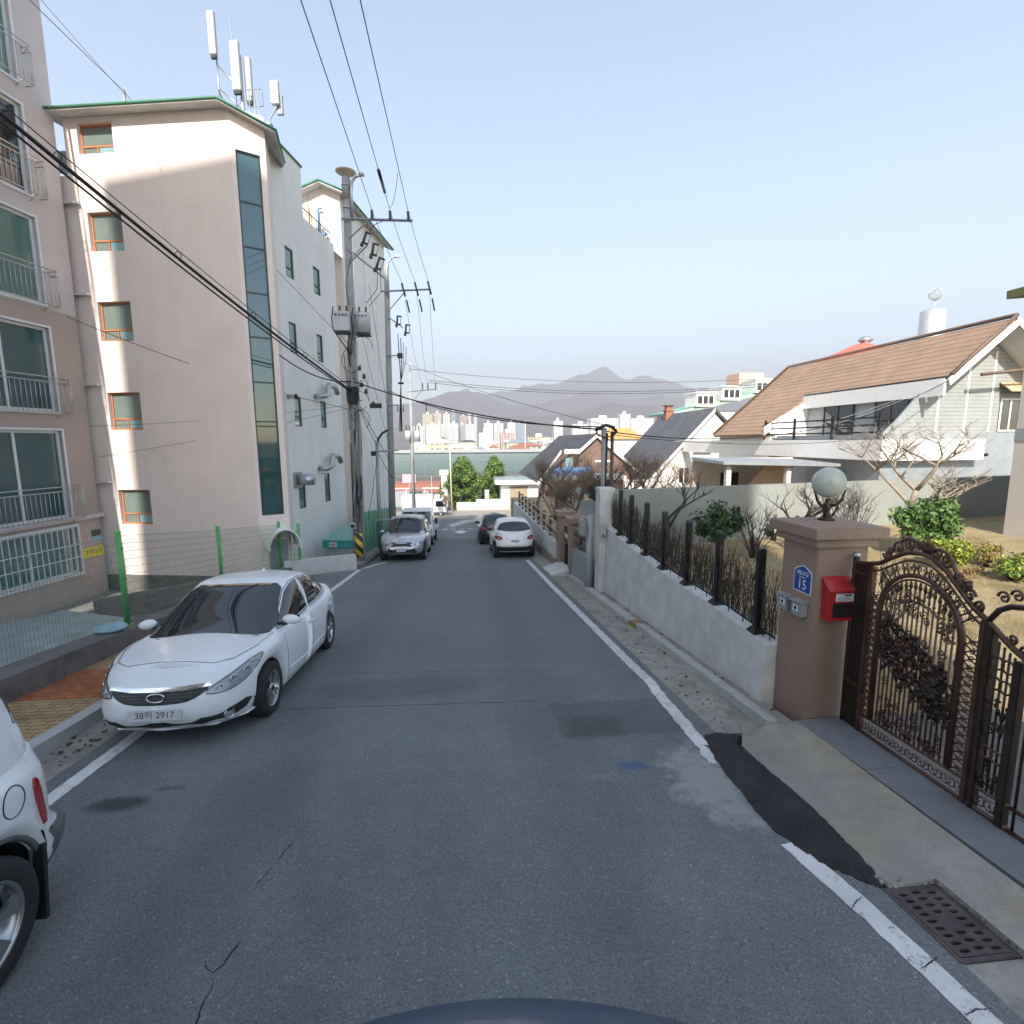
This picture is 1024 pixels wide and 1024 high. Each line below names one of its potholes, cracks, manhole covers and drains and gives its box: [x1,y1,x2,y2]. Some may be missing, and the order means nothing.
drain grate [882,884,1022,965]
crack [195,942,240,1024]
crack [248,840,295,895]
